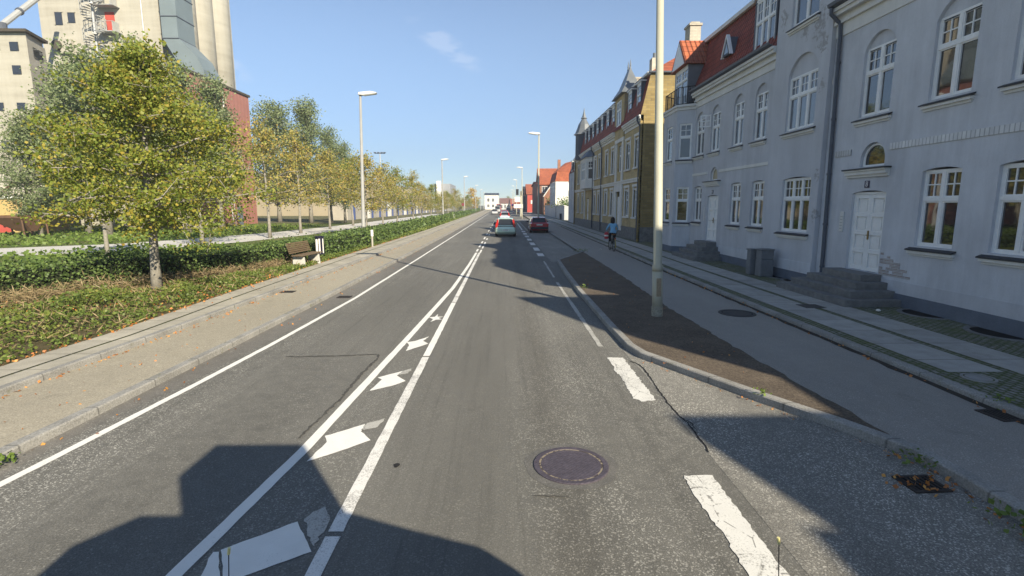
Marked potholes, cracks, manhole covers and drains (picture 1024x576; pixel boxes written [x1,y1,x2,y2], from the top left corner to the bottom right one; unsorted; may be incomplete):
manhole cover [718,309,756,317]
manhole cover [960,373,998,383]
manhole cover [524,444,618,490]
drain grate [891,474,953,494]
drain grate [974,408,1024,422]
